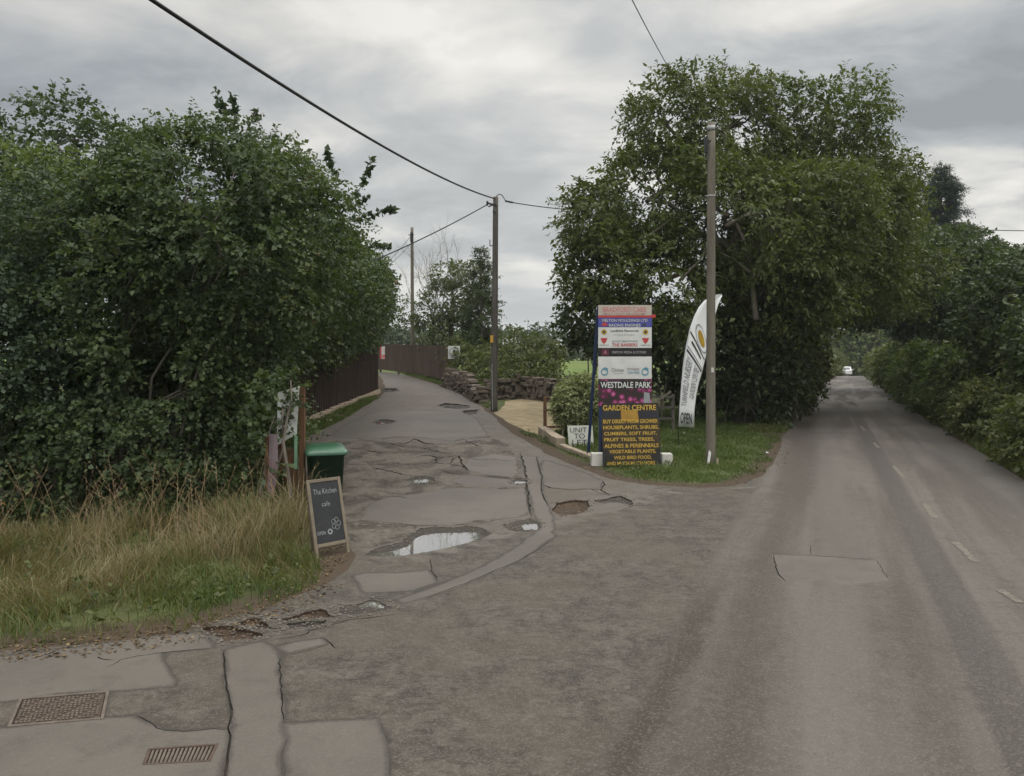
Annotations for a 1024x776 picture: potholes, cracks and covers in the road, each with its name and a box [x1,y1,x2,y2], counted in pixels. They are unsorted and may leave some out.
pothole [402,475,441,485]
pothole [191,621,272,646]
pothole [278,617,337,632]
pothole [588,495,638,507]
crack [98,648,233,776]
manhole cover [7,690,109,727]
drain grate [142,743,219,765]
pothole [548,499,595,517]
crack [357,436,610,514]
pothole [268,606,341,624]
pothole [328,596,400,618]
pothole [362,525,495,557]
